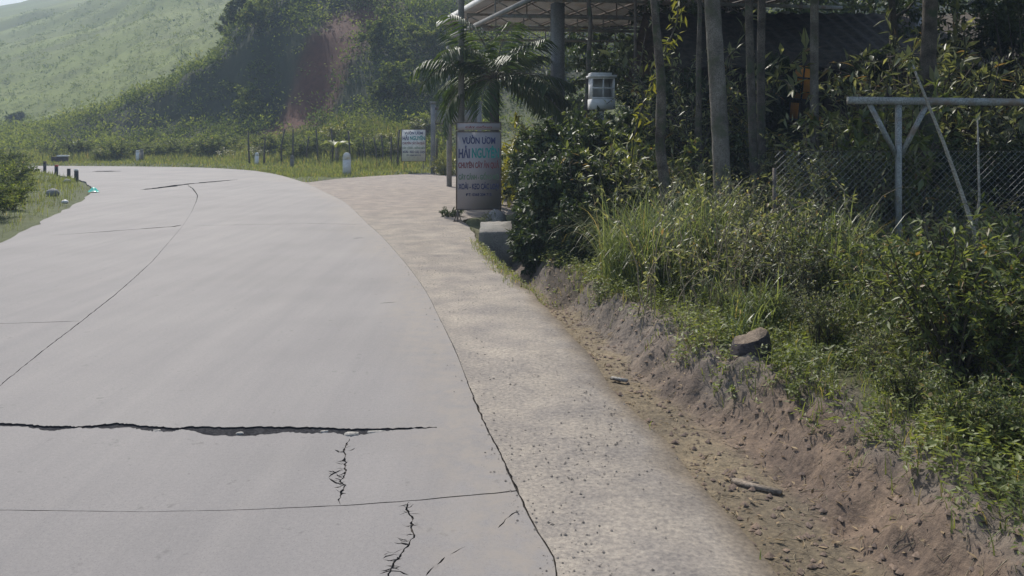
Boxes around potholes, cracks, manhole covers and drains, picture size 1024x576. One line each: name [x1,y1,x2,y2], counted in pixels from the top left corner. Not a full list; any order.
crack [0,423,437,503]
